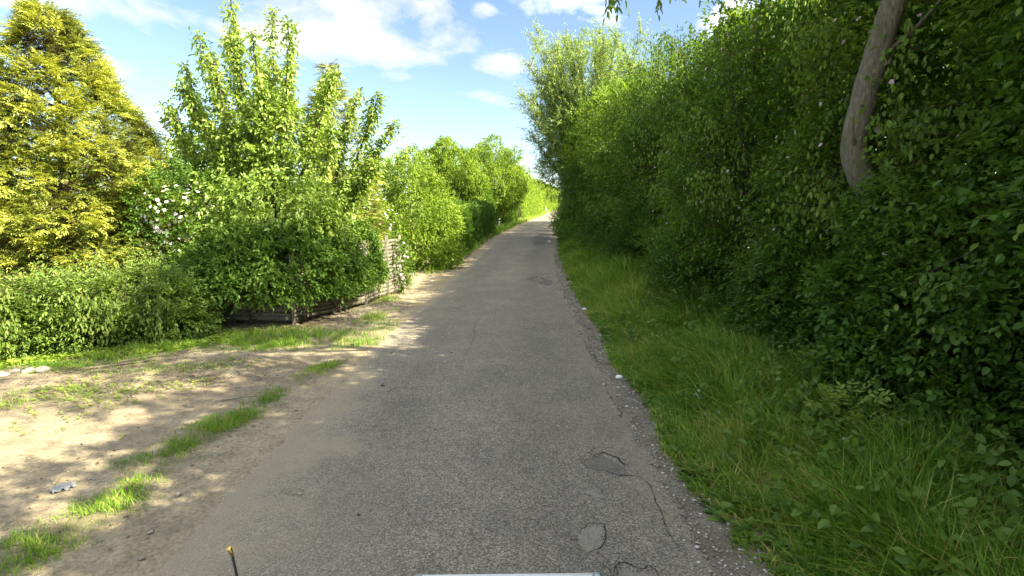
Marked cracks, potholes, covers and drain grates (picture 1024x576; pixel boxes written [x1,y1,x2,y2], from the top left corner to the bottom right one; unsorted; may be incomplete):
crack [570,523,658,574]
crack [561,335,689,559]
pothole [577,525,603,558]
pothole [583,455,628,476]
